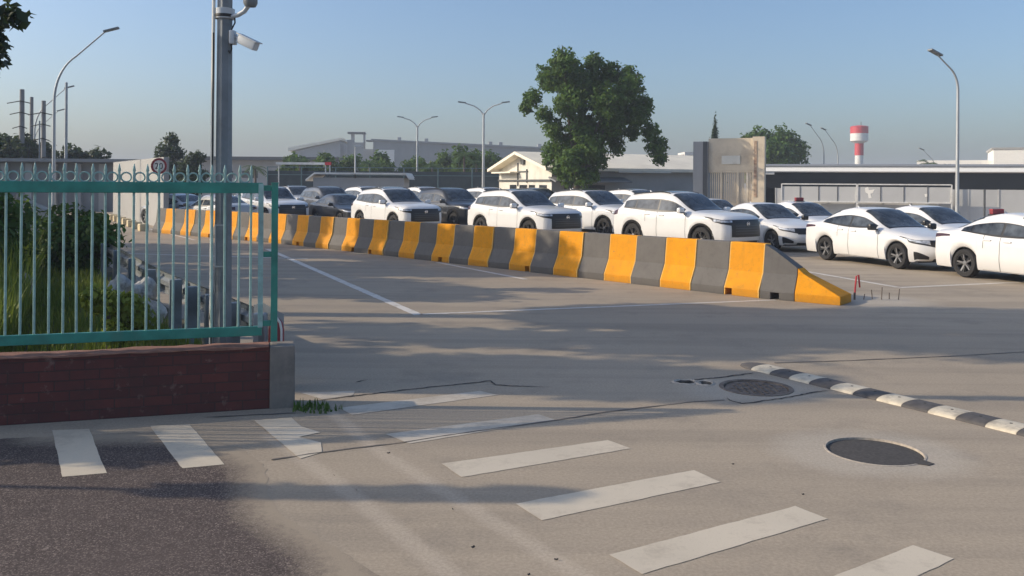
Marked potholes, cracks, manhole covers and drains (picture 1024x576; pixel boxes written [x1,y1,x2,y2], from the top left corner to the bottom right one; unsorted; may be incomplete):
manhole cover [719,379,794,397]
crack [316,380,542,401]
manhole cover [824,437,934,467]
